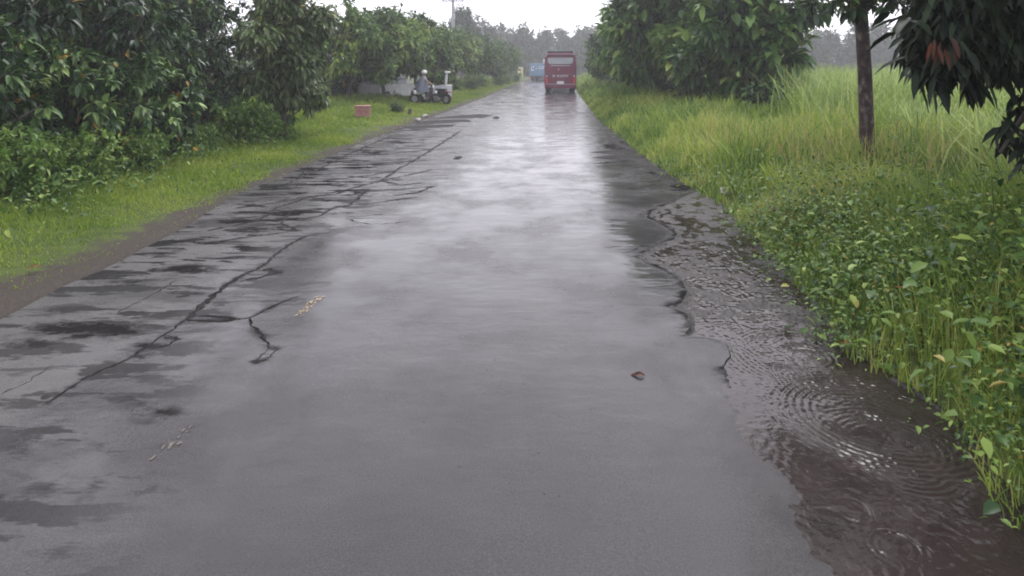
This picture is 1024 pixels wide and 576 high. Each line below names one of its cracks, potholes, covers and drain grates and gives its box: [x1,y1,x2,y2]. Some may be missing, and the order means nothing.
crack [2,131,461,403]
